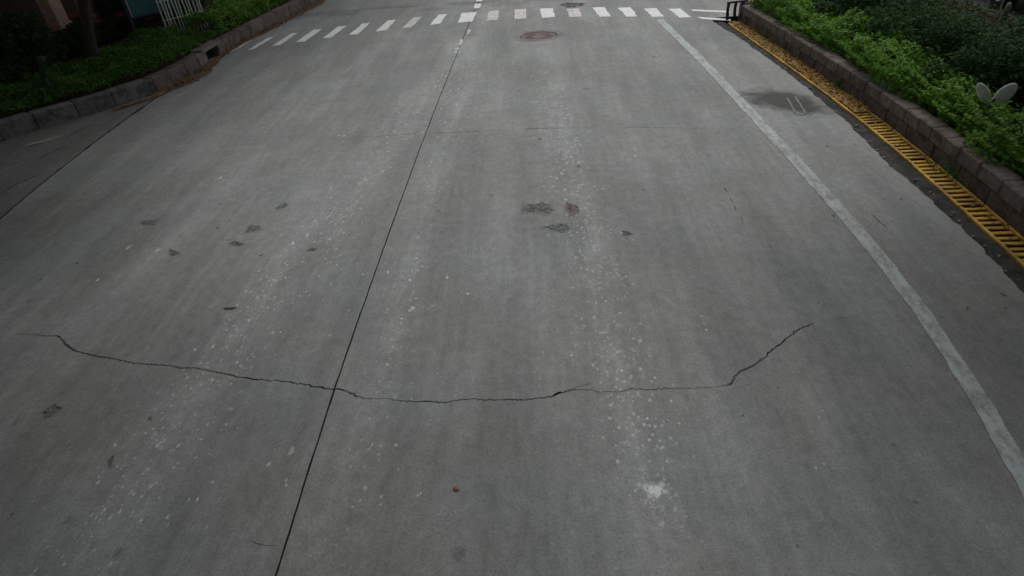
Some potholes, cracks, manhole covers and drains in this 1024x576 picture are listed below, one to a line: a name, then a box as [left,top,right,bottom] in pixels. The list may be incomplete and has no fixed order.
drain grate [747,36,782,54]
drain grate [906,158,985,208]
pothole [565,203,579,217]
pothole [520,202,554,215]
drain grate [958,205,1024,269]
drain grate [770,51,803,73]
manhole cover [513,30,564,42]
crack [16,324,811,403]
drain grate [827,95,884,125]
drain grate [864,122,929,161]
pothole [545,223,570,234]
drain grate [796,71,845,96]
